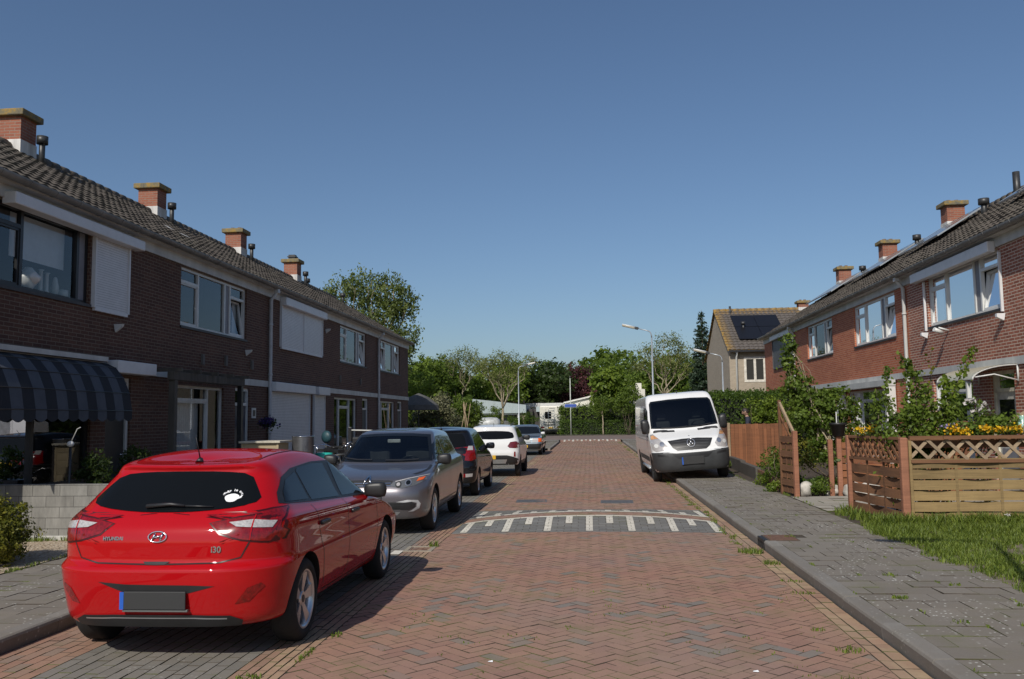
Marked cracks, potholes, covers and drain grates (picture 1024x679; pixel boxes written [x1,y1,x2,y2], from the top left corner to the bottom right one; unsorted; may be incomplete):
drain grate [757,535,800,551]
